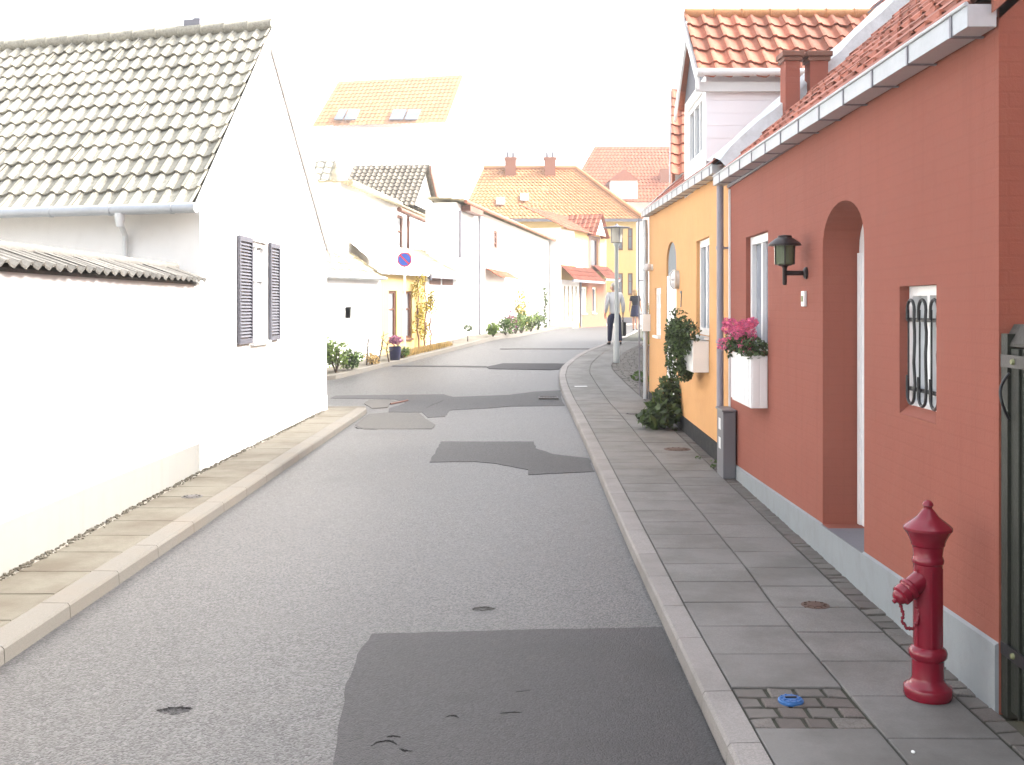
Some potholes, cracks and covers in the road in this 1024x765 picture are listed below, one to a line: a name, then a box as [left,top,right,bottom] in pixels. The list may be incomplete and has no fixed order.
pothole [157,706,192,715]
crack [371,735,411,752]
manhole cover [801,601,830,609]
